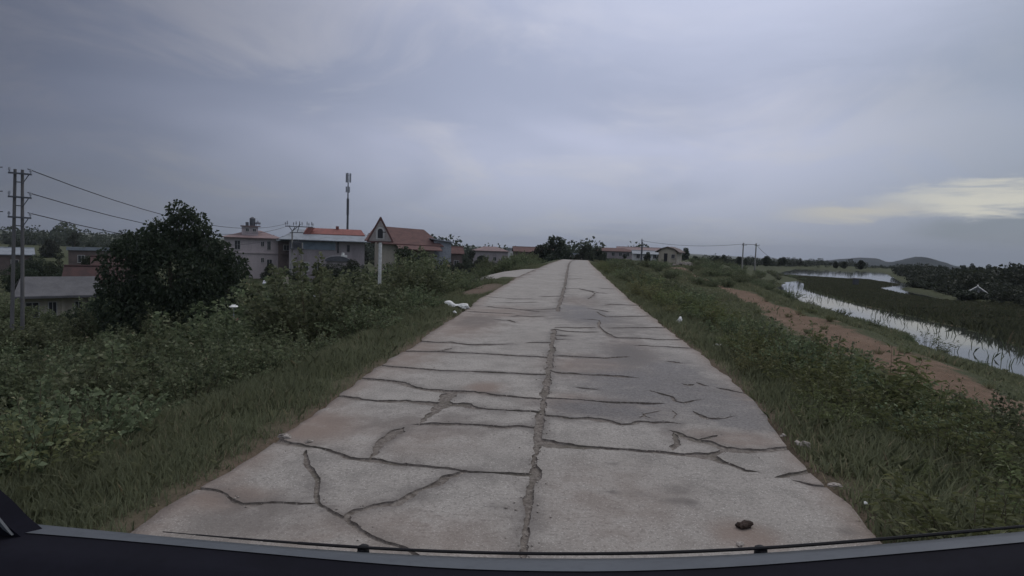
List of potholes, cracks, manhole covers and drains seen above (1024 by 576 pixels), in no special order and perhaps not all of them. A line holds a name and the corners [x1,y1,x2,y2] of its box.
crack [201,288,824,555]
